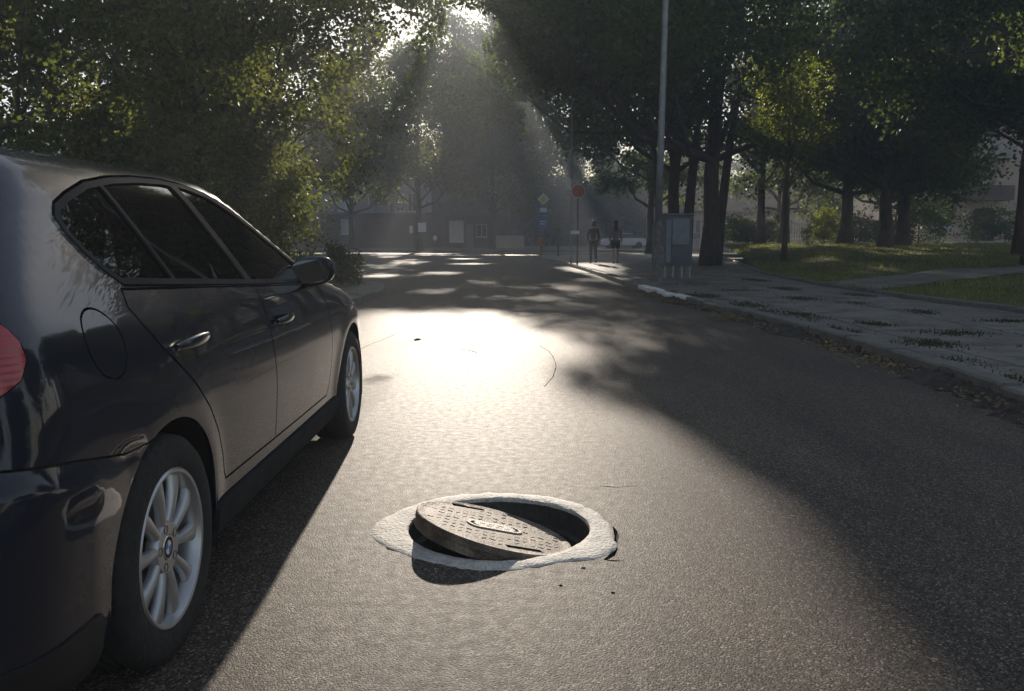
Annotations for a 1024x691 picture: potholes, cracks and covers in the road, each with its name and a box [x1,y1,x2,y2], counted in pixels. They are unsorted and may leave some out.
manhole cover [415,501,571,561]
